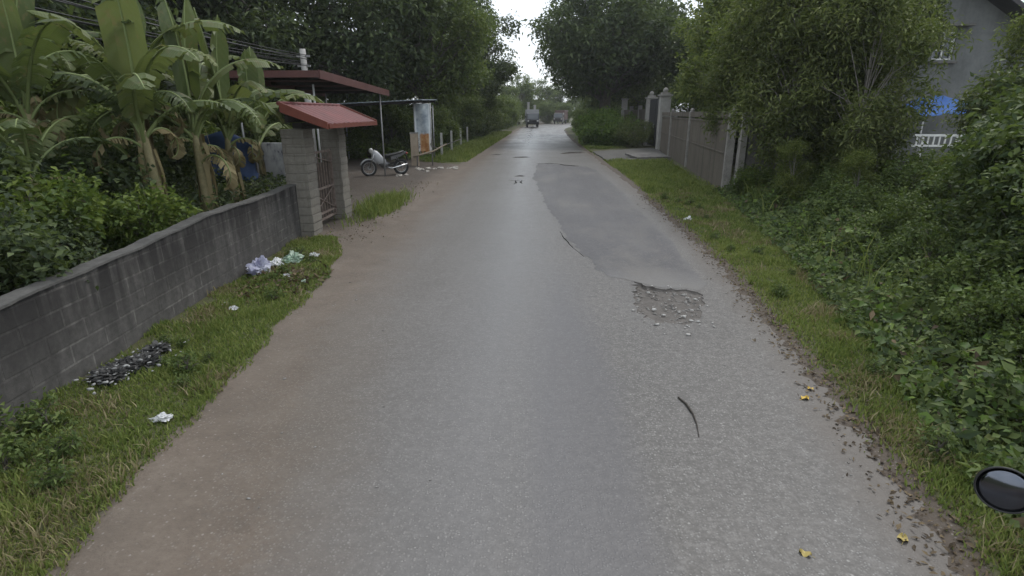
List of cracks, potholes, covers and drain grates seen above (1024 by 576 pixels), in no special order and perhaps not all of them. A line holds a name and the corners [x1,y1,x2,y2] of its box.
pothole [632,282,706,325]
